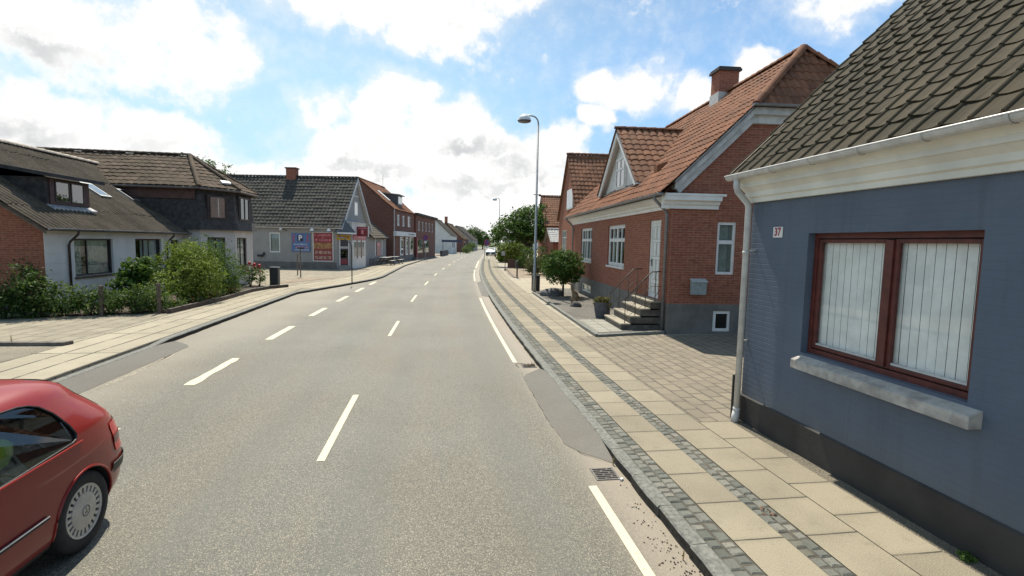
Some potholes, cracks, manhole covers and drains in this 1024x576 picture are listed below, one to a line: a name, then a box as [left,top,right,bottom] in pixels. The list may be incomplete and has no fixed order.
drain grate [589,467,620,481]
